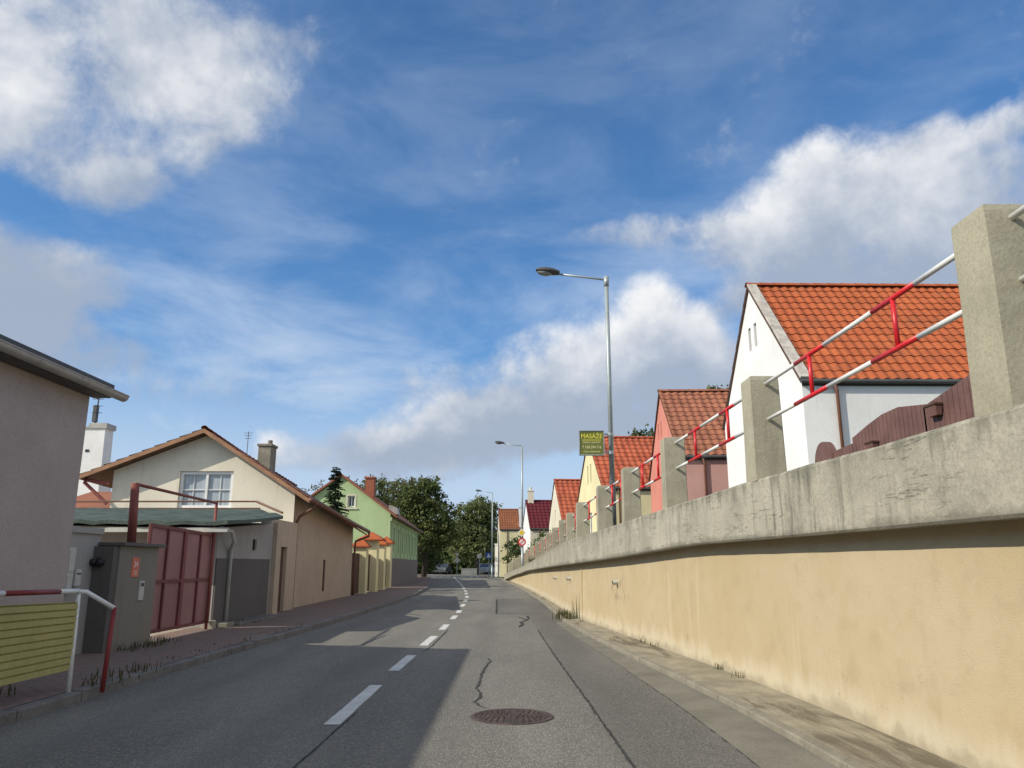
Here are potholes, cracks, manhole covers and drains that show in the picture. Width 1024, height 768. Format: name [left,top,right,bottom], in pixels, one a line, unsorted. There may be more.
manhole cover [470,708,554,725]
crack [473,658,491,708]
